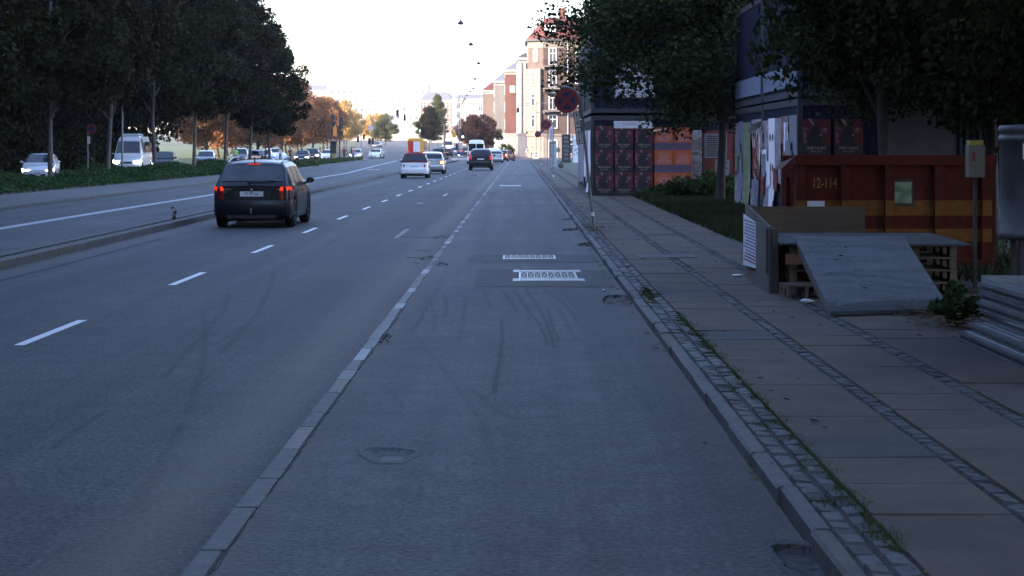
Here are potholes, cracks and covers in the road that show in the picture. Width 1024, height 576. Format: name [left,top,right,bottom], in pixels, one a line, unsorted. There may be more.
pothole [377,332,394,345]
pothole [355,445,424,464]
pothole [760,538,826,576]
pothole [600,294,634,306]
